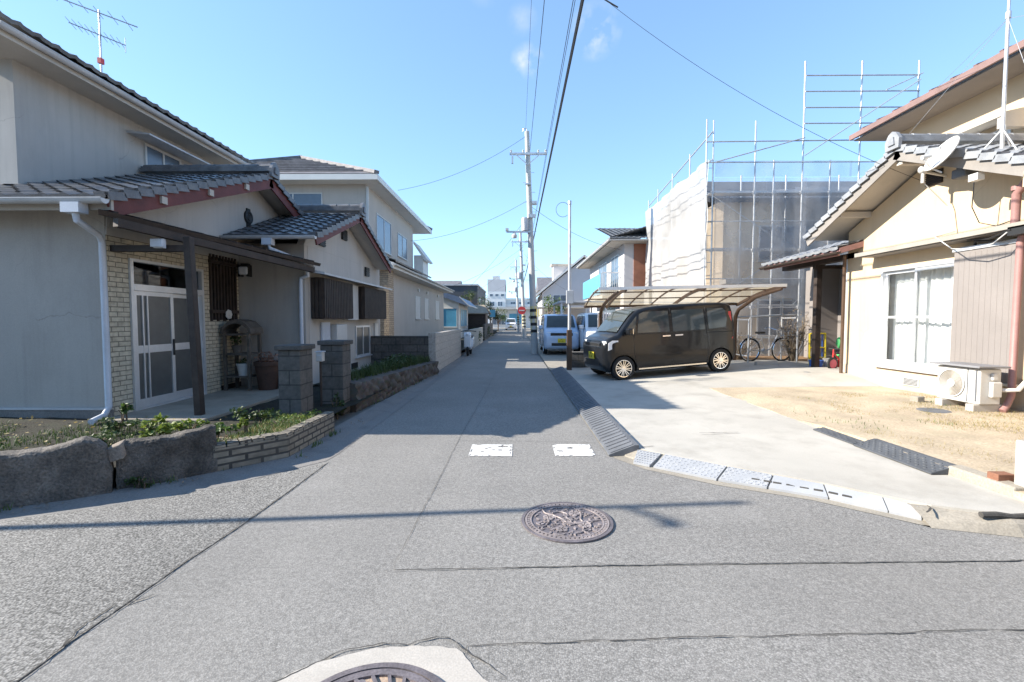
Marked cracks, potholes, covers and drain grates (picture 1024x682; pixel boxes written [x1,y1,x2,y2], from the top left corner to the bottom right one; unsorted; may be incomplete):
manhole cover [521,502,613,544]
manhole cover [321,662,443,682]
